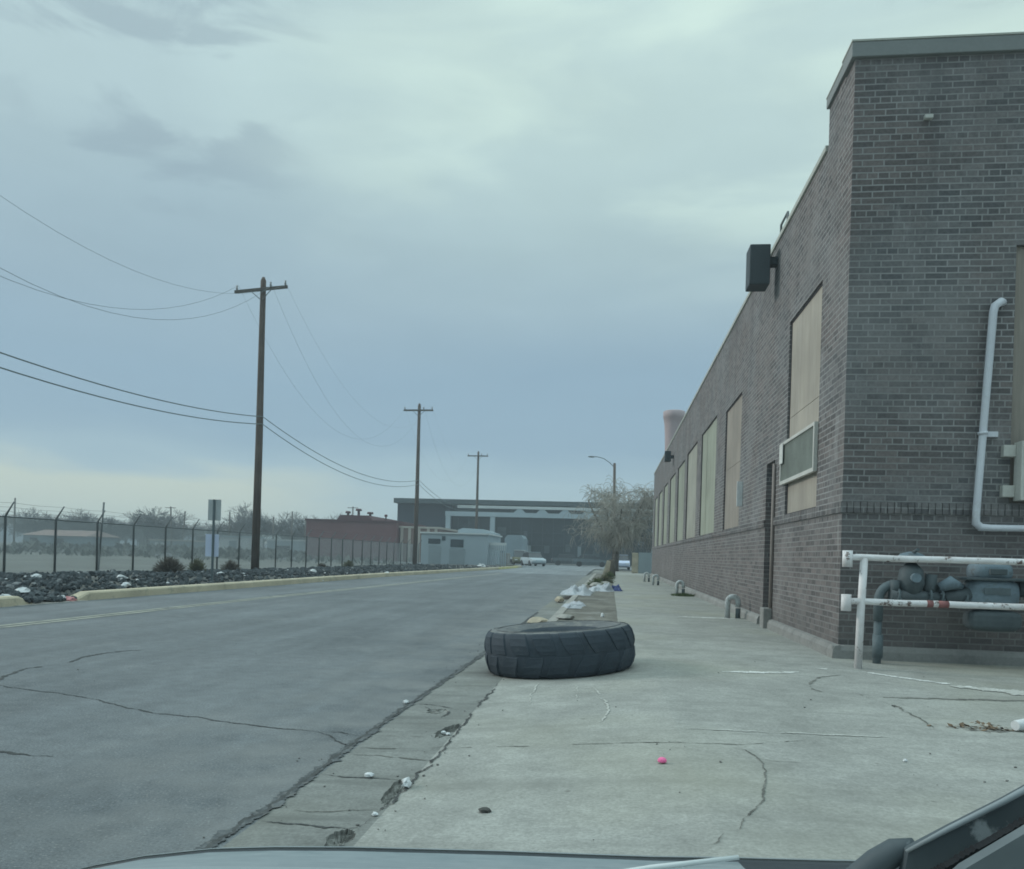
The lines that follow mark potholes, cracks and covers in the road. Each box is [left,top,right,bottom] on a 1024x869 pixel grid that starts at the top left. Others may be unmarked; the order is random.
crack [860,694,1024,731]
pothole [434,723,460,738]
pothole [381,780,403,806]
pothole [324,829,356,846]
crack [459,739,810,845]
crack [0,650,442,760]
